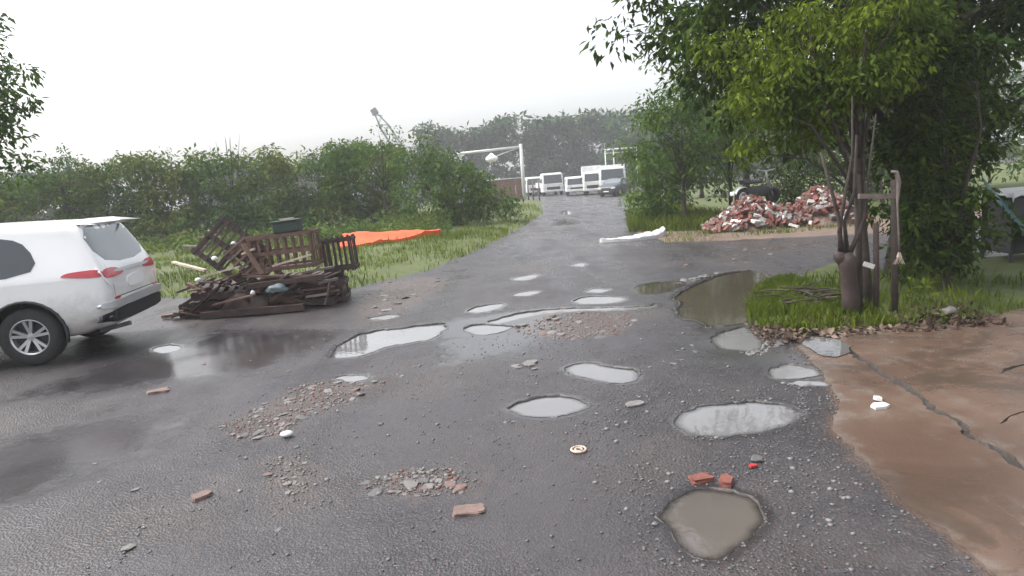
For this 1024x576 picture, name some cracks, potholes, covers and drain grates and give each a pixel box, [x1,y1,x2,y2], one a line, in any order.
pothole [328,322,449,359]
pothole [635,282,682,294]
pothole [672,400,811,439]
pothole [563,362,643,384]
pothole [672,270,770,328]
crack [843,342,1024,470]
pothole [654,487,769,561]
pothole [765,363,823,380]
pothole [467,303,504,313]
pothole [331,374,371,383]
pothole [573,296,626,304]
pothole [505,394,592,418]
